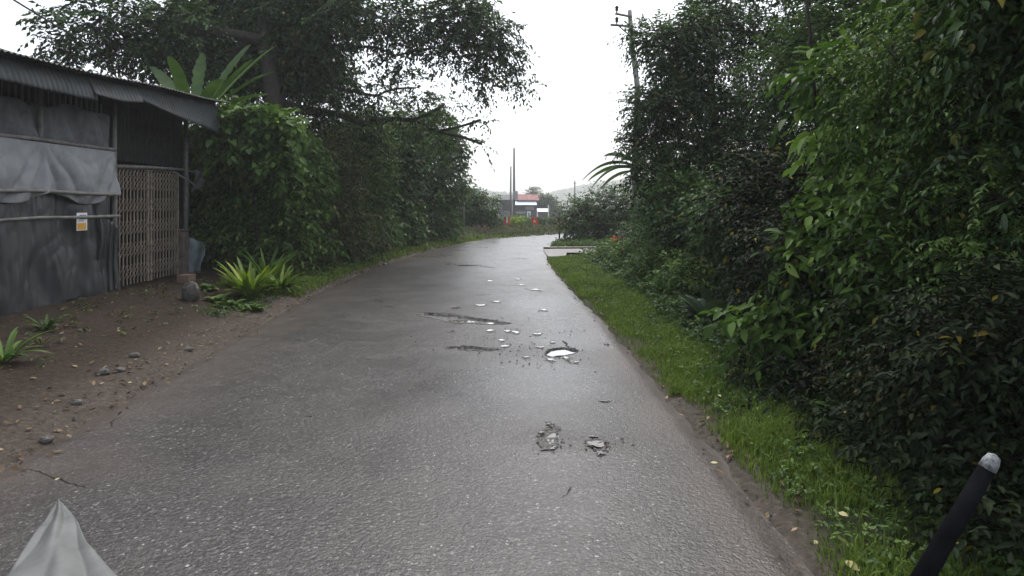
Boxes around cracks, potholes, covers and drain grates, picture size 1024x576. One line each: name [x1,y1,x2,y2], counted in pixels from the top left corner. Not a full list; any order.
pothole [416,313,511,325]
pothole [536,425,561,450]
pothole [584,438,610,451]
pothole [545,347,578,357]
